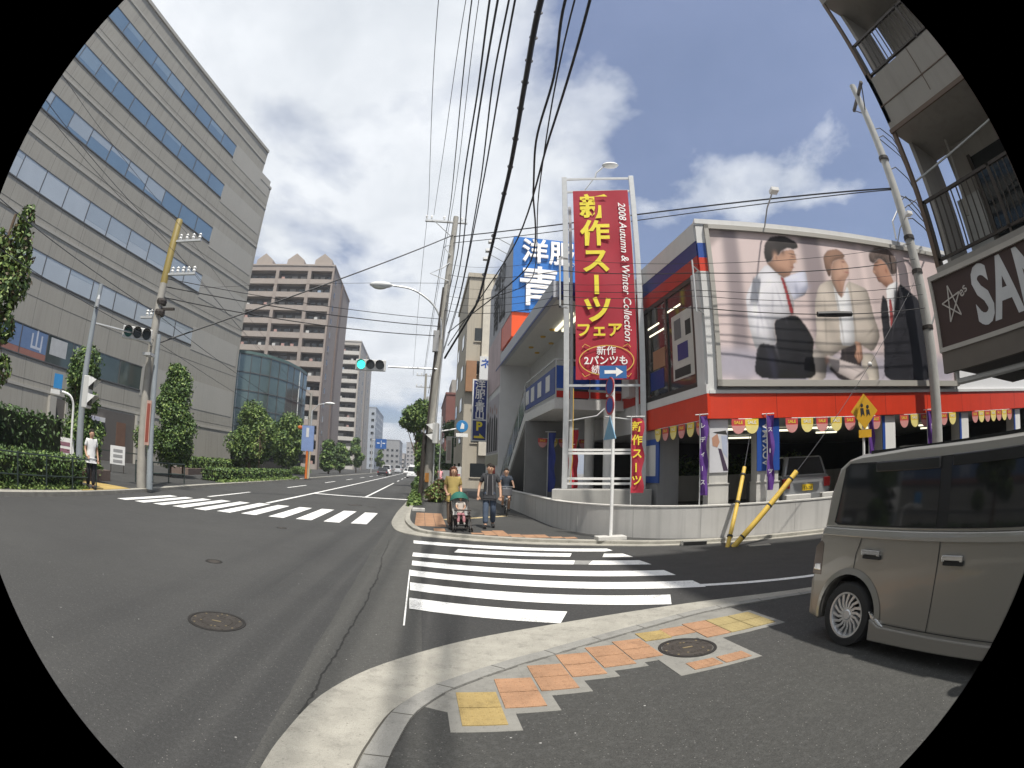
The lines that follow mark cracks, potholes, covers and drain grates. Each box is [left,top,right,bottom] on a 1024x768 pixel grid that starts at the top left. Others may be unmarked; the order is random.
manhole cover [658,638,717,658]
manhole cover [188,611,246,632]
crack [297,540,389,714]
